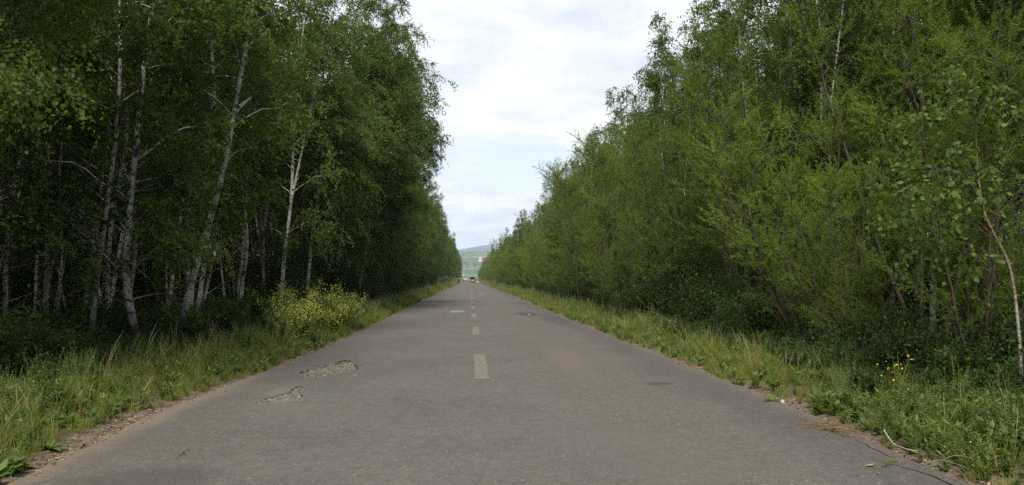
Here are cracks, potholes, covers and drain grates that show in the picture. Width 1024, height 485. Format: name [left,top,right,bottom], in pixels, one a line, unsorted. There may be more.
crack [857,441,953,485]
pothole [281,358,381,380]
pothole [256,384,324,408]
